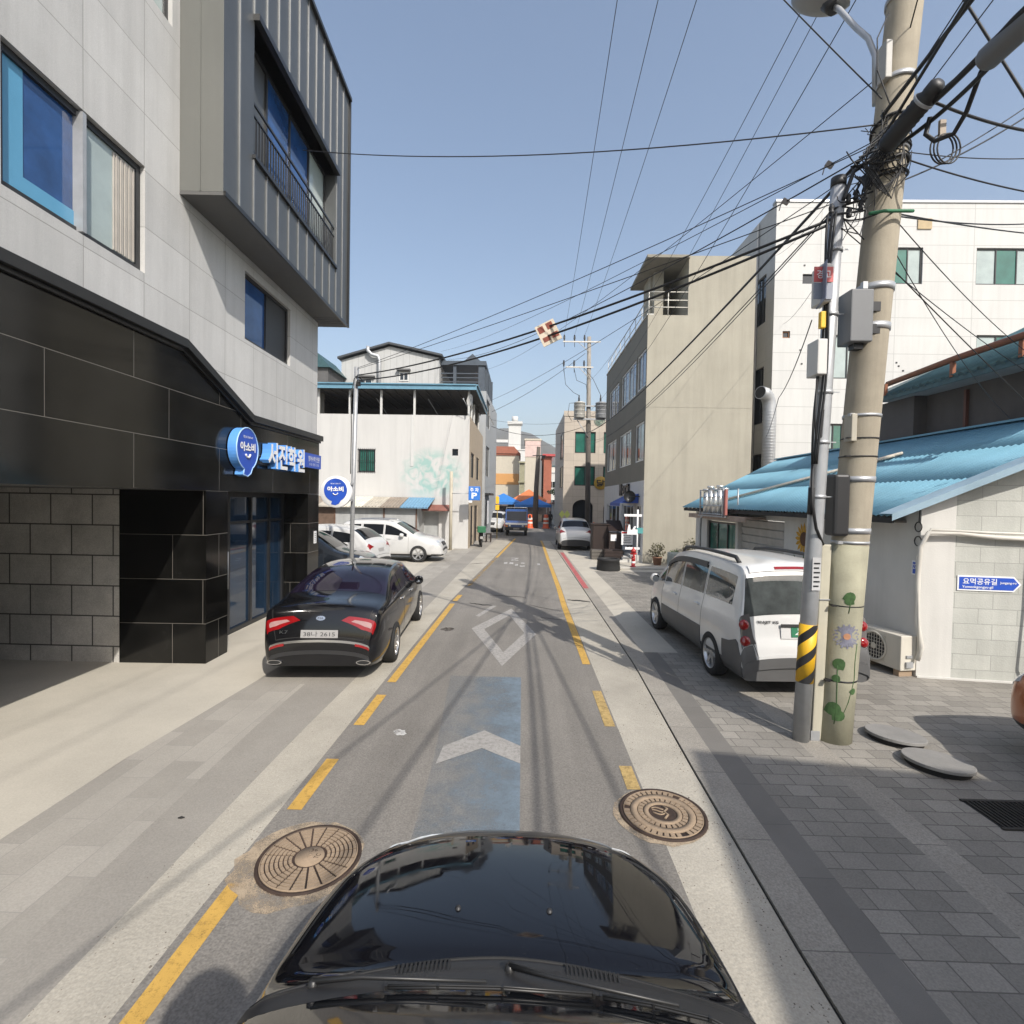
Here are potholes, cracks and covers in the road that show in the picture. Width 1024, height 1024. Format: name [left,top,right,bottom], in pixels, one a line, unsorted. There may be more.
drain grate [959,798,1024,831]
manhole cover [254,825,362,897]
manhole cover [619,789,709,842]
